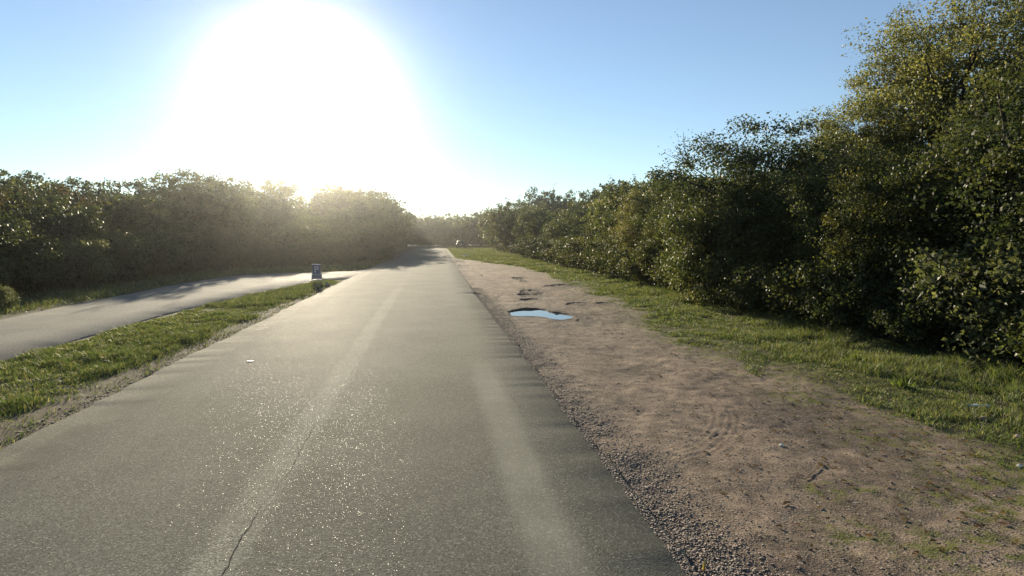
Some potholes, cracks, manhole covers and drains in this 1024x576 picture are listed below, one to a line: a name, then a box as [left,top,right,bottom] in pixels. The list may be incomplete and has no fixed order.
pothole [504,307,577,321]
pothole [515,289,547,299]
crack [221,429,313,576]
